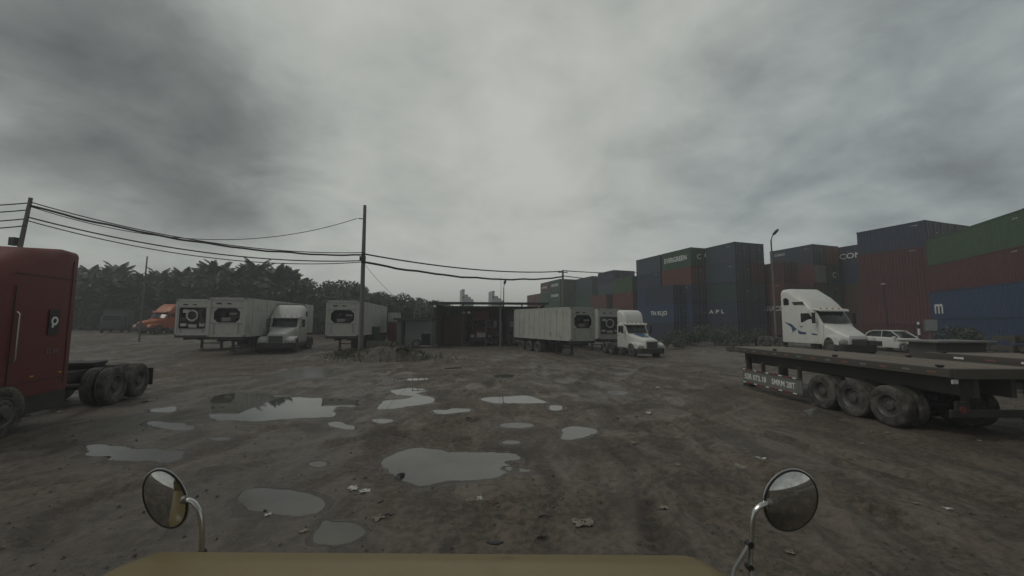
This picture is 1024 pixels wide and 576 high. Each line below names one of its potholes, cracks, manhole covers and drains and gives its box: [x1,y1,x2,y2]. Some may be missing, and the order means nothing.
pothole [500,466,538,475]
pothole [369,446,526,493]
pothole [139,420,199,432]
pothole [305,519,373,549]
pothole [223,485,335,521]
pothole [478,395,552,404]
pothole [192,391,367,426]
pothole [371,387,438,411]
pothole [69,443,195,466]
pothole [557,425,602,441]
